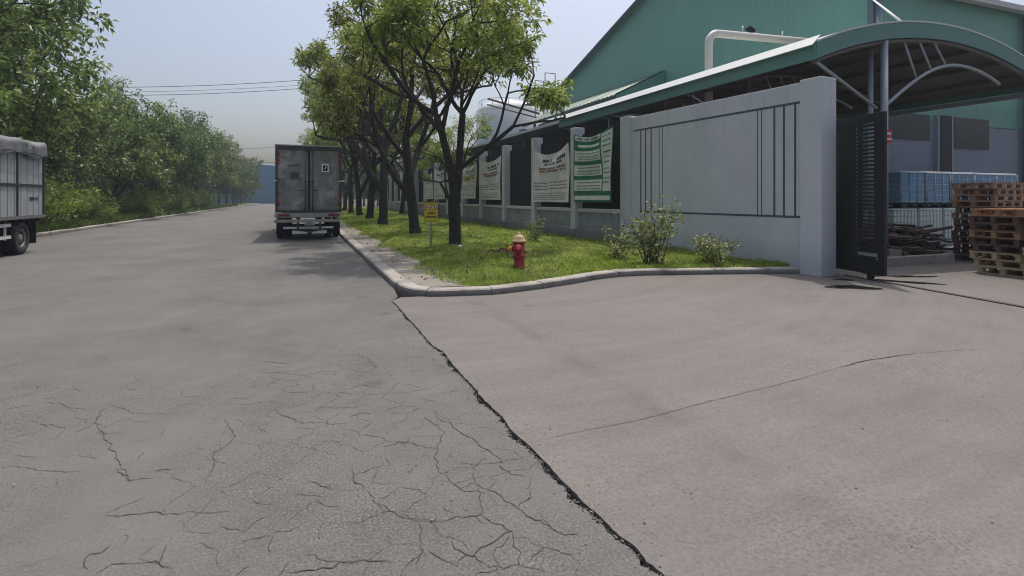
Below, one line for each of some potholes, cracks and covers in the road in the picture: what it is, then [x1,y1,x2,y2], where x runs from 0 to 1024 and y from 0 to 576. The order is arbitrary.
crack [0,366,247,576]
crack [203,333,580,576]
crack [554,349,974,437]
crack [405,318,645,567]
